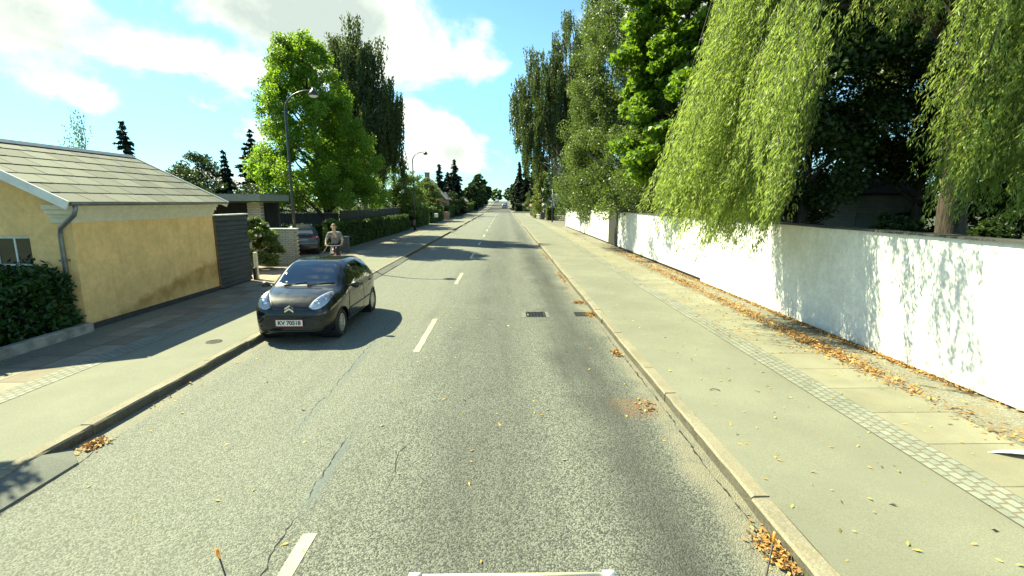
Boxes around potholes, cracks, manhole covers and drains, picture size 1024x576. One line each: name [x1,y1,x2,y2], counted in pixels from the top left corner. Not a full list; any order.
crack [255,432,352,576]
